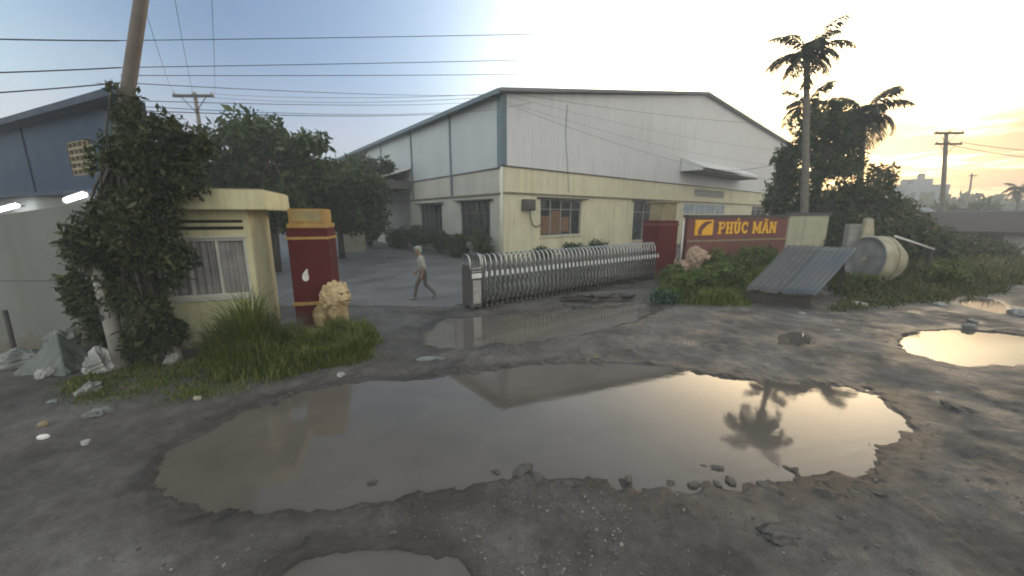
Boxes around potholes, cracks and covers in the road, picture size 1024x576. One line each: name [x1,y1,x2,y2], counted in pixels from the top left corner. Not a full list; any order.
pothole [418,300,668,351]
pothole [261,535,487,576]
pothole [953,296,1013,314]
pothole [886,327,1024,369]
pothole [770,330,819,347]
pothole [126,358,934,533]
